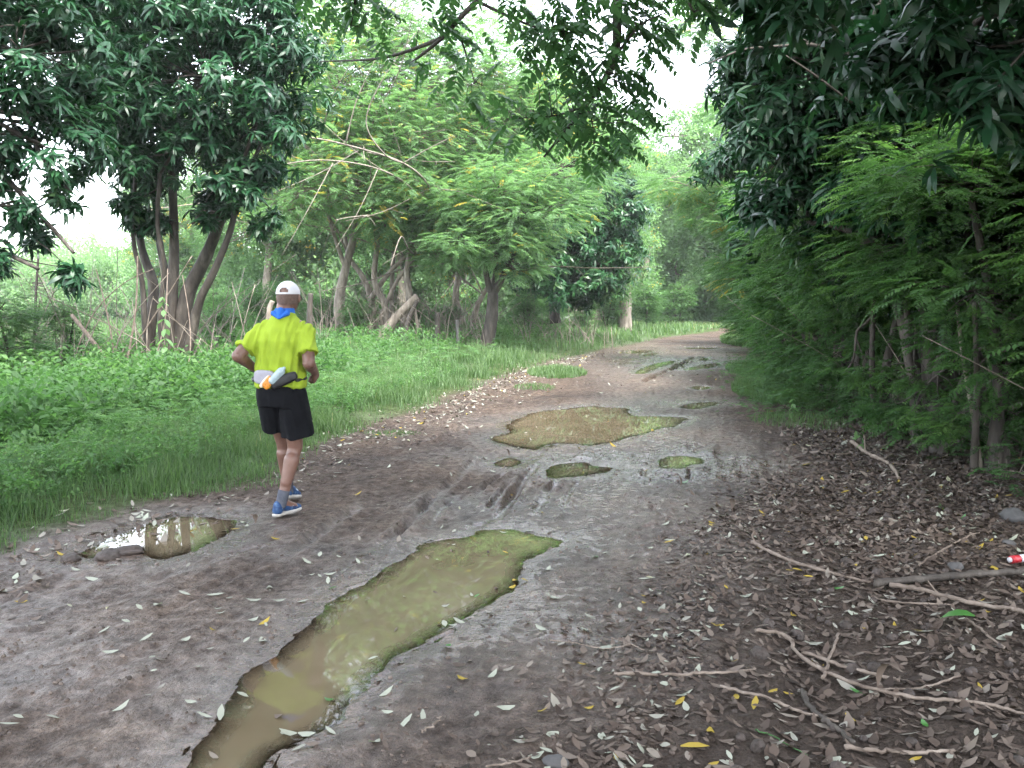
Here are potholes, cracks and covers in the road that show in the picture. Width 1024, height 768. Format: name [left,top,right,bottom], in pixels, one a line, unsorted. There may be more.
pothole [678,401,721,409]
pothole [482,404,697,450]
pothole [536,458,625,479]
pothole [681,362,721,370]
pothole [489,457,526,467]
pothole [147,522,585,768]
pothole [57,509,255,565]
pothole [633,360,678,374]
pothole [653,453,710,469]
